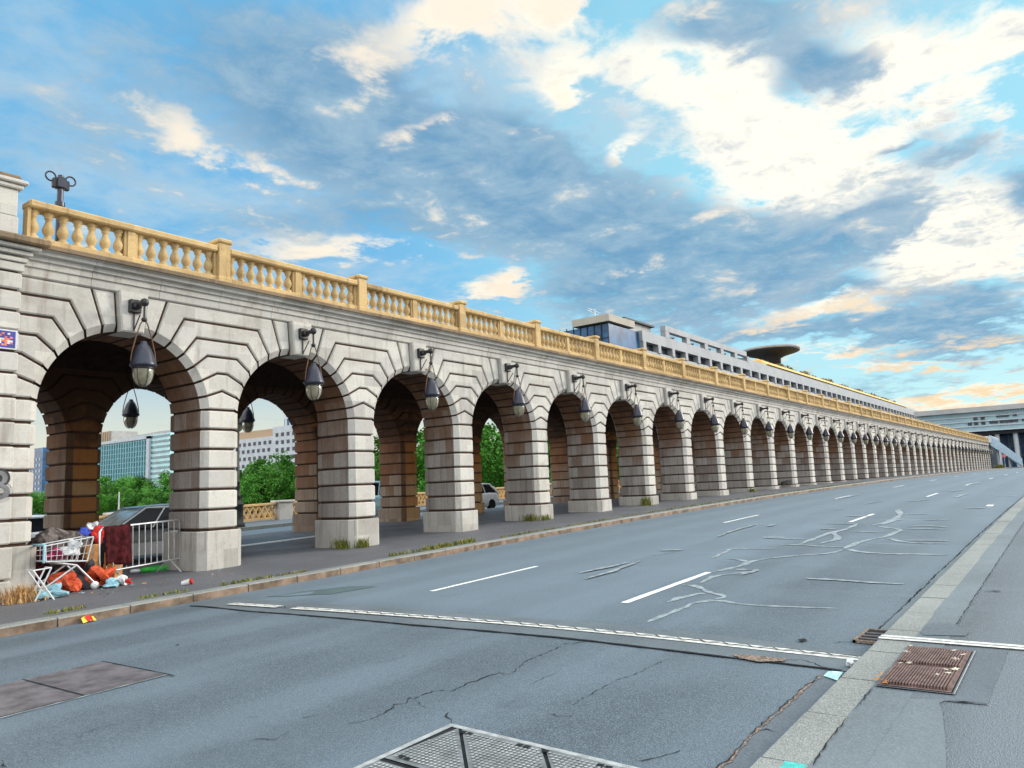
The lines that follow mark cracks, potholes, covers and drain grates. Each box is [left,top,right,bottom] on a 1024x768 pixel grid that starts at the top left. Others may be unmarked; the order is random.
crack [348,641,585,724]
drain grate [852,628,887,644]
